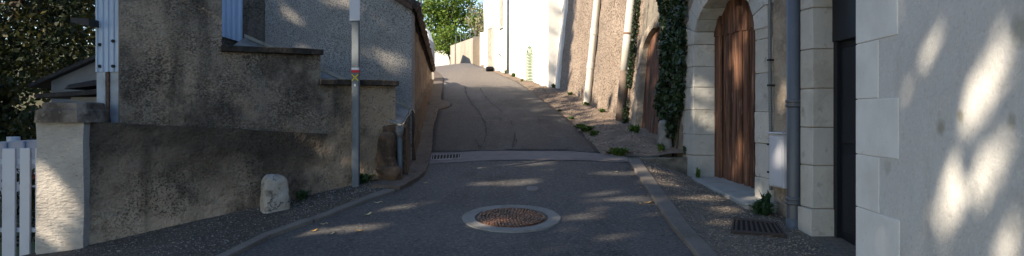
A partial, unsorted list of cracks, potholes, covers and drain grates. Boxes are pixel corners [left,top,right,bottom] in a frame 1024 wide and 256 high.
manhole cover [462,205,561,233]
crack [465,87,518,149]
drain grate [731,217,787,238]
drain grate [431,153,462,161]
